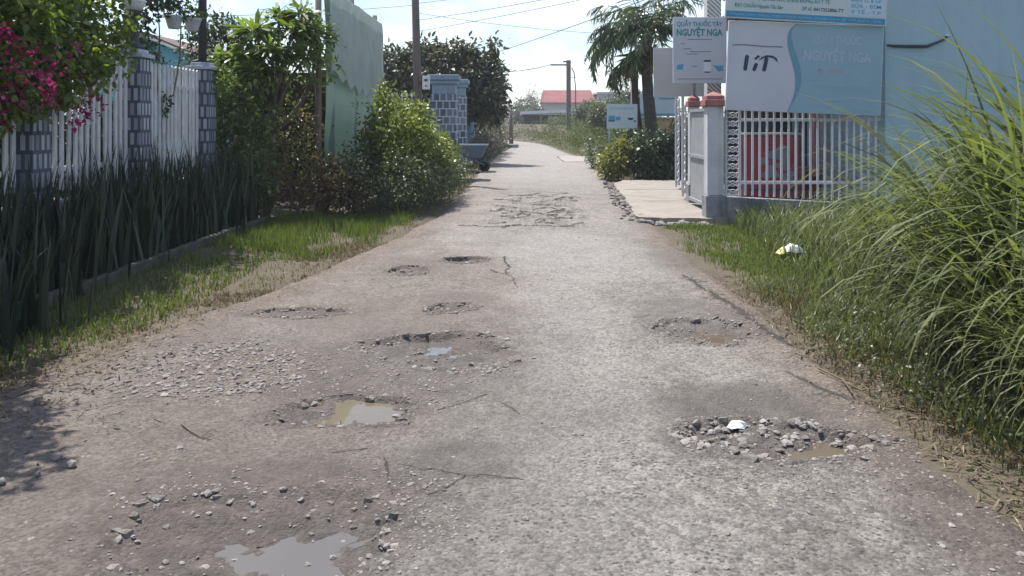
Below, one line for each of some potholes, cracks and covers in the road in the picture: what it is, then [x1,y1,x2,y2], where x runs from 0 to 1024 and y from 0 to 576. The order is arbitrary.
pothole [383,264,433,276]
crack [332,448,525,495]
pothole [244,305,357,320]
crack [676,274,799,348]
pothole [650,414,899,466]
pothole [641,316,764,347]
crack [438,394,520,414]
pothole [332,329,528,380]
pothole [421,301,484,315]
crack [489,256,518,287]
crack [458,192,584,228]
